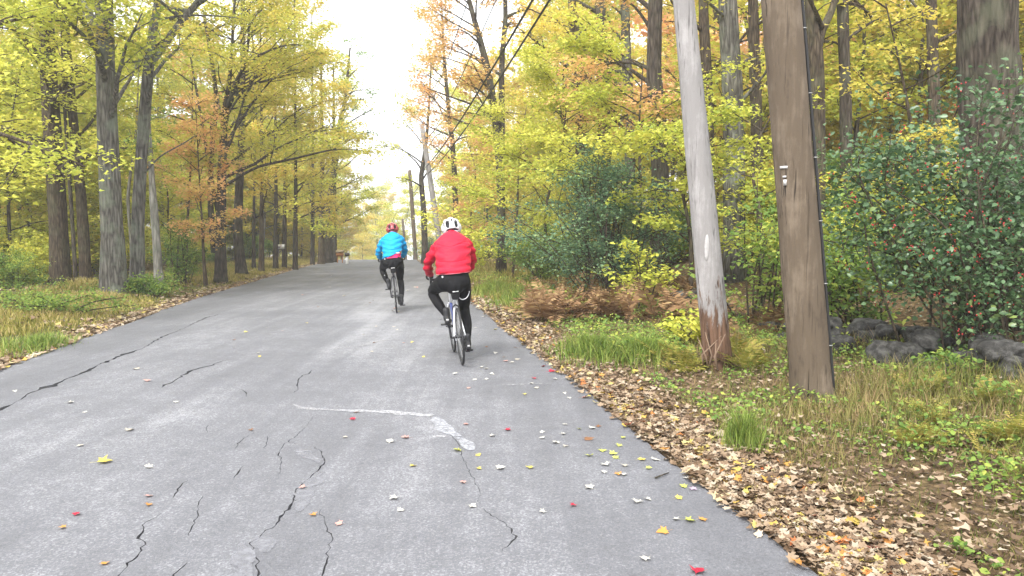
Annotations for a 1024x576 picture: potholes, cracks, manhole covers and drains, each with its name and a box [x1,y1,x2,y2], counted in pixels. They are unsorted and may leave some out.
crack [440,421,518,550]
crack [319,512,334,576]
crack [237,416,325,576]
crack [118,480,203,576]
